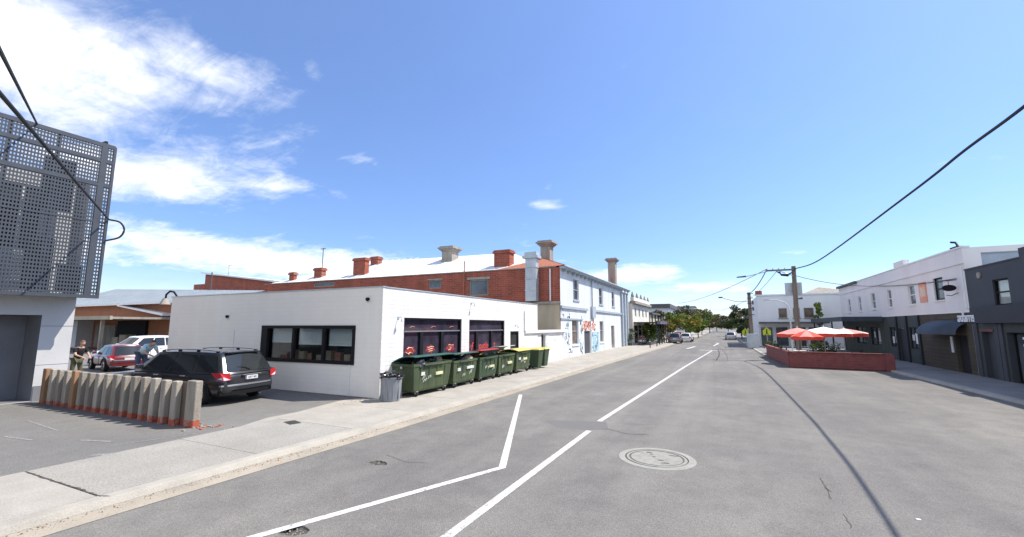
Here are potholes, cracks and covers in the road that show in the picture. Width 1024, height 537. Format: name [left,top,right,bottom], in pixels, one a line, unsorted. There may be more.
manhole cover [618,448,697,471]
